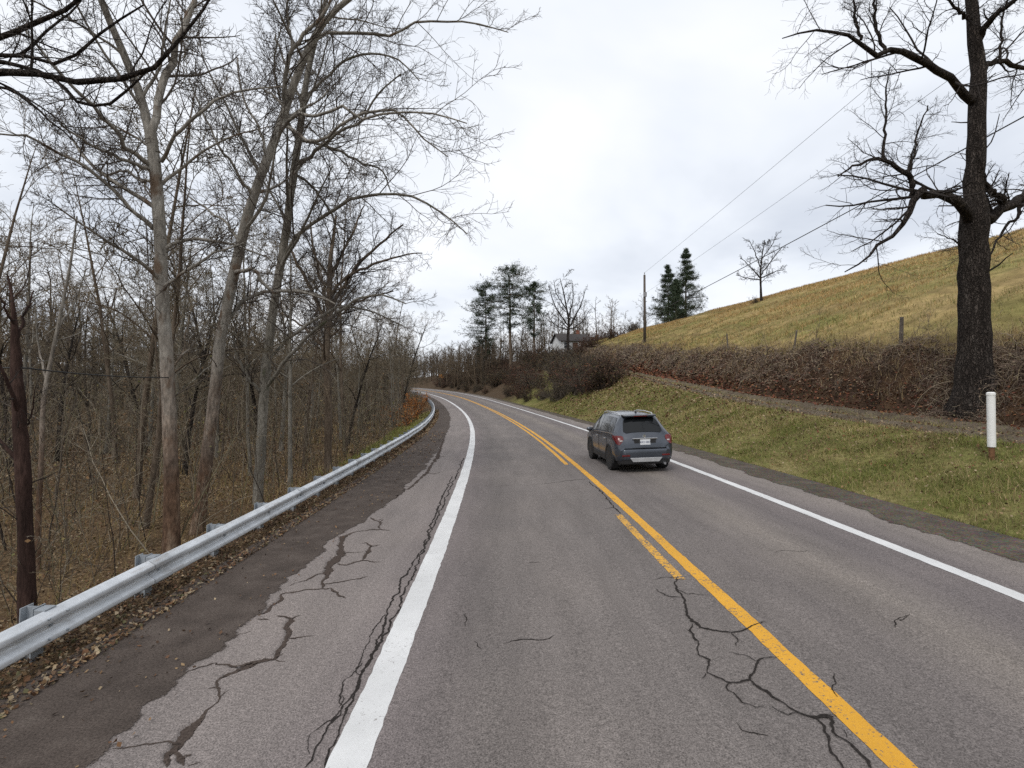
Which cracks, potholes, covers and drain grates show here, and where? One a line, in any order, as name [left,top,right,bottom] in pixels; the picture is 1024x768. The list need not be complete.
crack [113,517,383,767]
crack [396,439,445,498]
crack [657,577,872,768]
